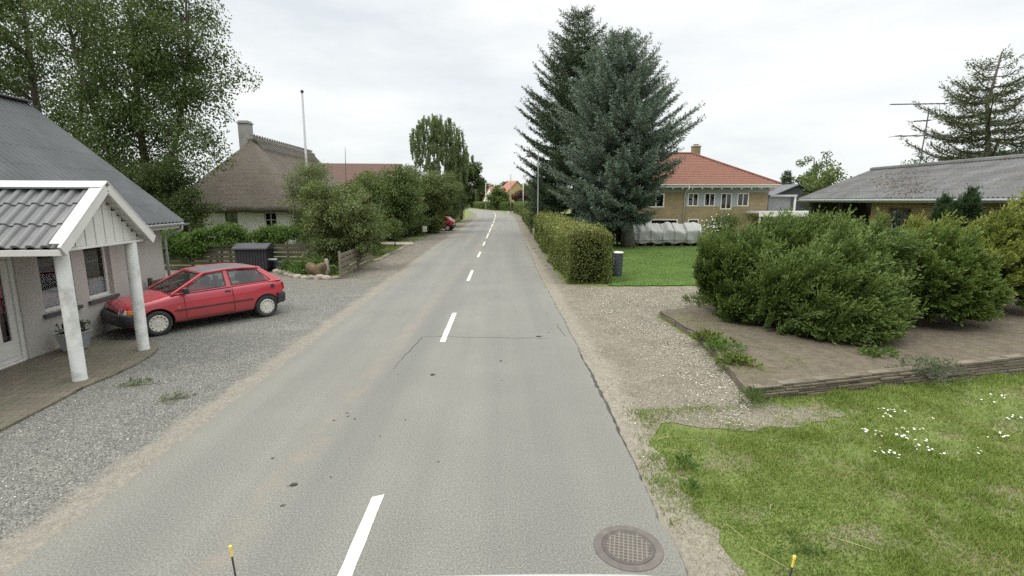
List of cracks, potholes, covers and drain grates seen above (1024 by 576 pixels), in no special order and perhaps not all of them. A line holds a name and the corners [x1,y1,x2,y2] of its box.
manhole cover [593,525,664,572]
